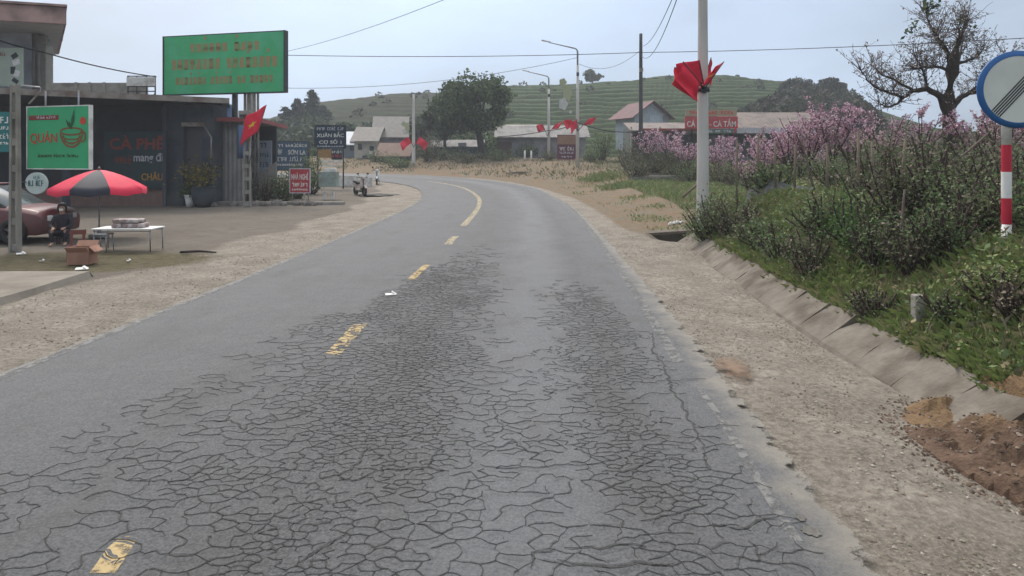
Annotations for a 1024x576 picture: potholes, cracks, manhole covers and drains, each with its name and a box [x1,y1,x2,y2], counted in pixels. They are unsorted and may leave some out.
crack [0,244,820,576]
